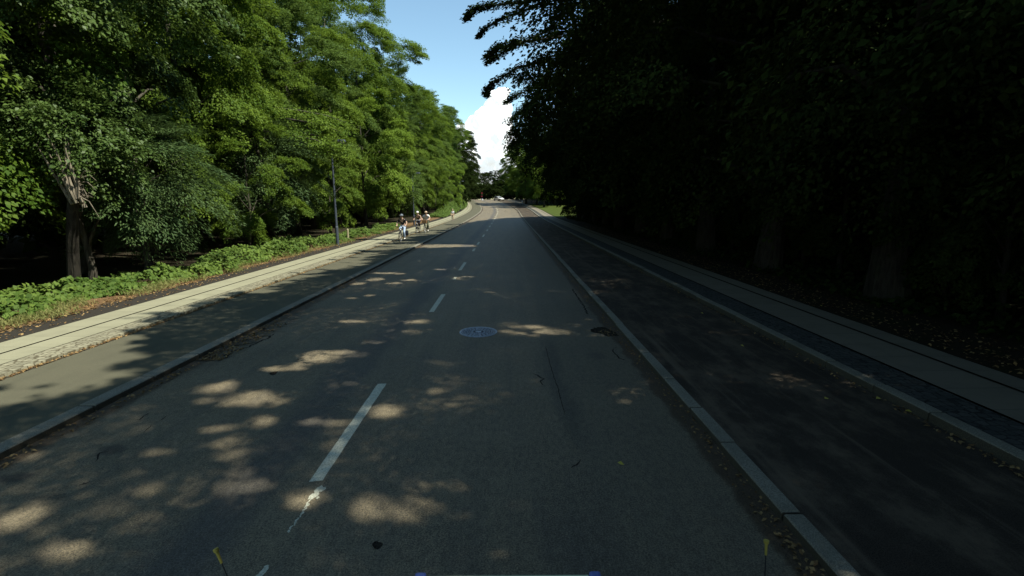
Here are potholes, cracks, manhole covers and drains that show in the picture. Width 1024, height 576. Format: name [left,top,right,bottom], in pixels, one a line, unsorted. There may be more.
pothole [591,327,619,336]
manhole cover [460,327,497,337]
